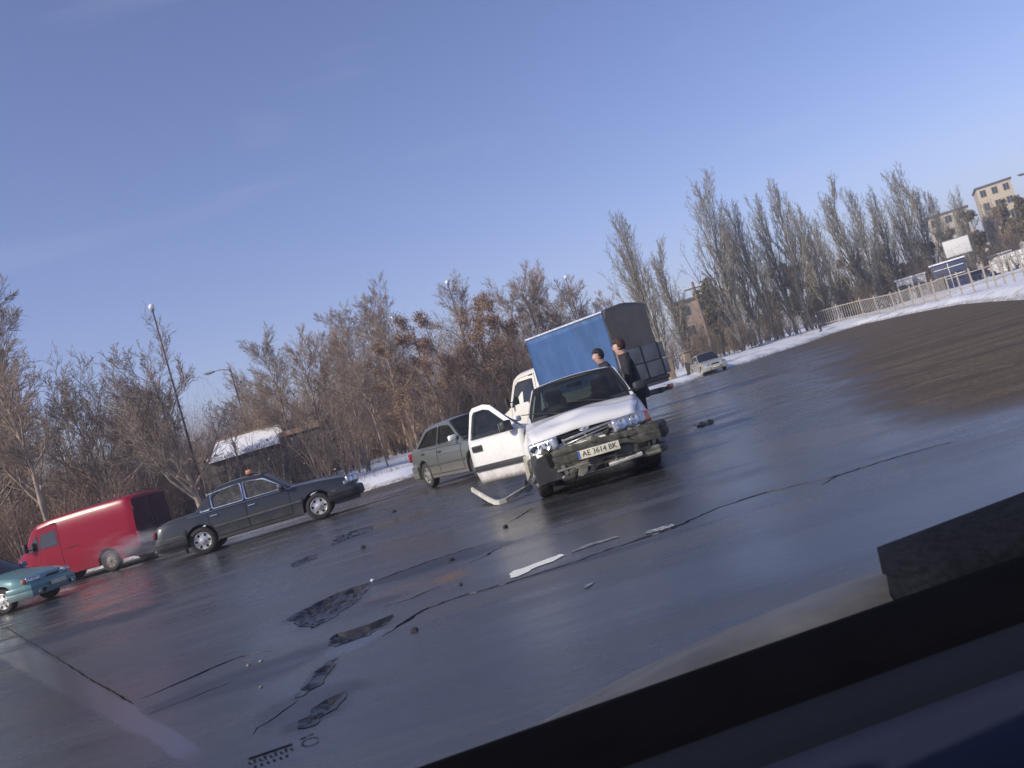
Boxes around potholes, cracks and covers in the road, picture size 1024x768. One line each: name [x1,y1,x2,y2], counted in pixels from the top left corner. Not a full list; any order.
pothole [328,614,394,647]
crack [142,650,298,734]
pothole [286,582,371,628]
pothole [297,691,346,729]
pothole [294,657,339,698]
crack [380,442,951,636]
pothole [331,526,373,545]
pothole [291,554,318,568]
